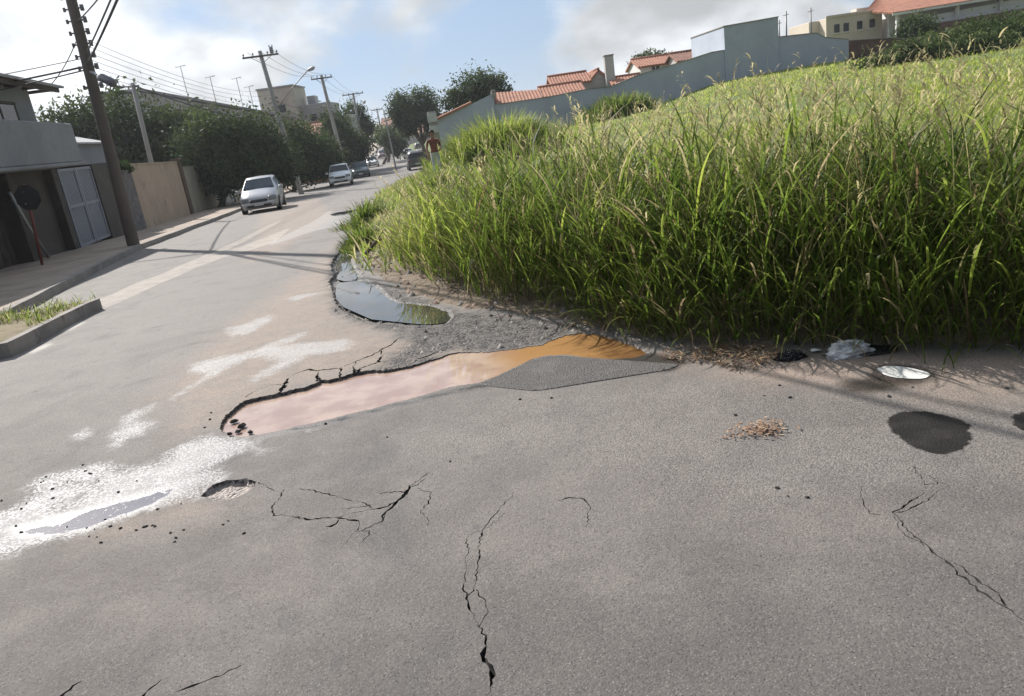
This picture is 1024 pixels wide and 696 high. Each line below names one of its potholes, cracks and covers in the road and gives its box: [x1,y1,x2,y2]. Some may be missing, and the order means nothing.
pothole [201,478,257,501]
crack [860,467,1024,620]
crack [462,492,514,696]
crack [142,665,241,696]
crack [258,472,431,544]
pothole [219,333,650,437]
pothole [328,242,454,326]
